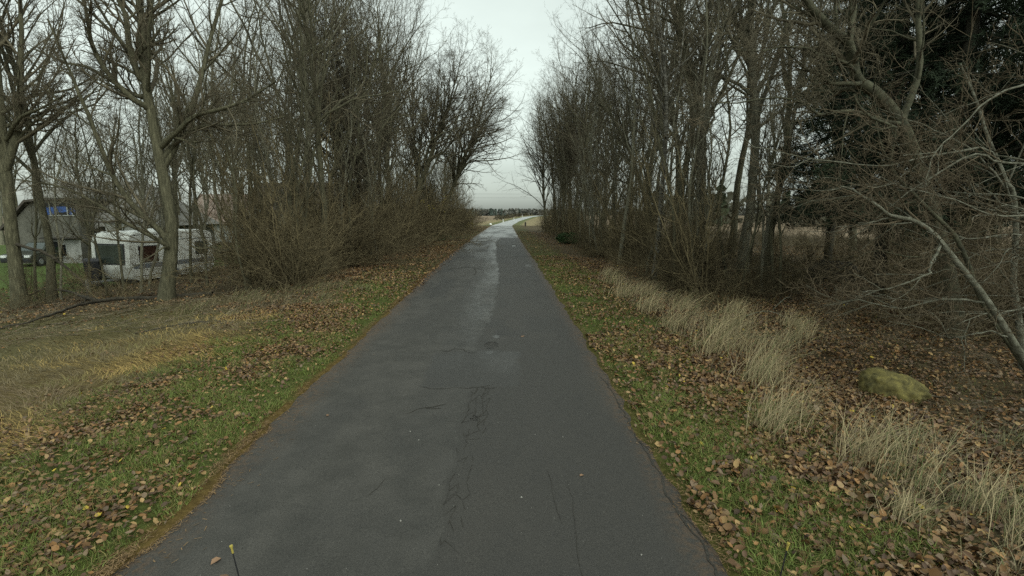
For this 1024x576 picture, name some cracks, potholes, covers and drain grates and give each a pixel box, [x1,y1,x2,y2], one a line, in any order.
crack [409,385,490,545]
crack [548,473,583,576]
